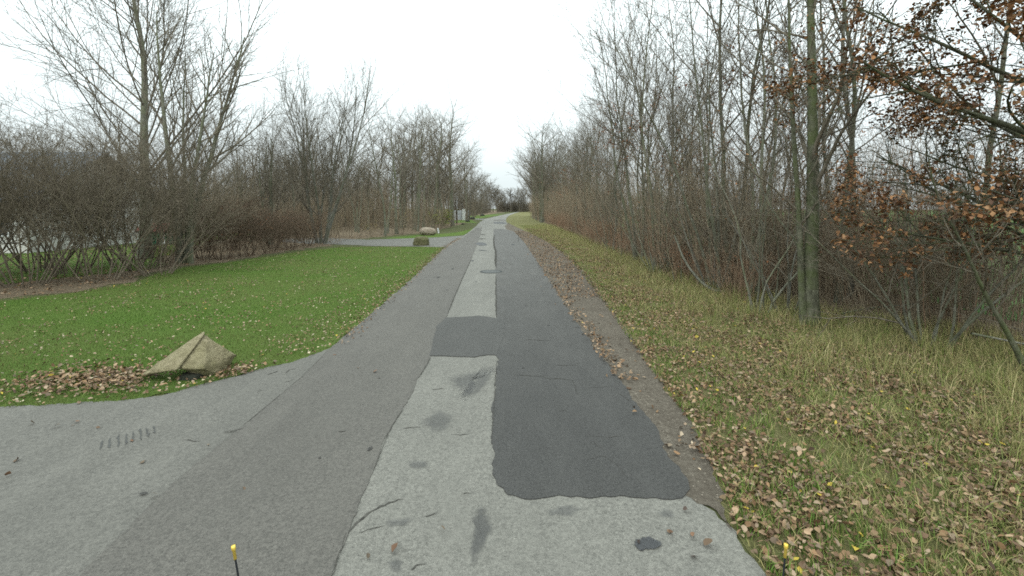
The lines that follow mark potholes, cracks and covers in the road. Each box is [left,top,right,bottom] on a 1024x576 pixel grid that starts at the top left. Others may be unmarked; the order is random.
crack [348,499,399,533]
pothole [634,536,661,550]
